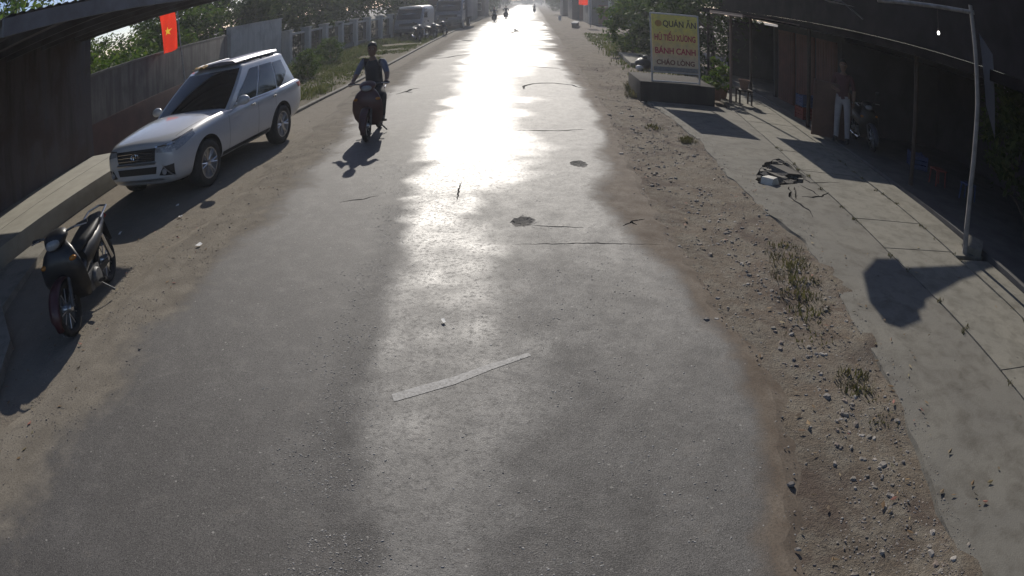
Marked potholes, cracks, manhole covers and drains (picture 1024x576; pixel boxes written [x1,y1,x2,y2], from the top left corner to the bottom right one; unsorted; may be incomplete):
pothole [510,216,536,227]
crack [513,225,657,245]
pothole [755,159,834,217]
